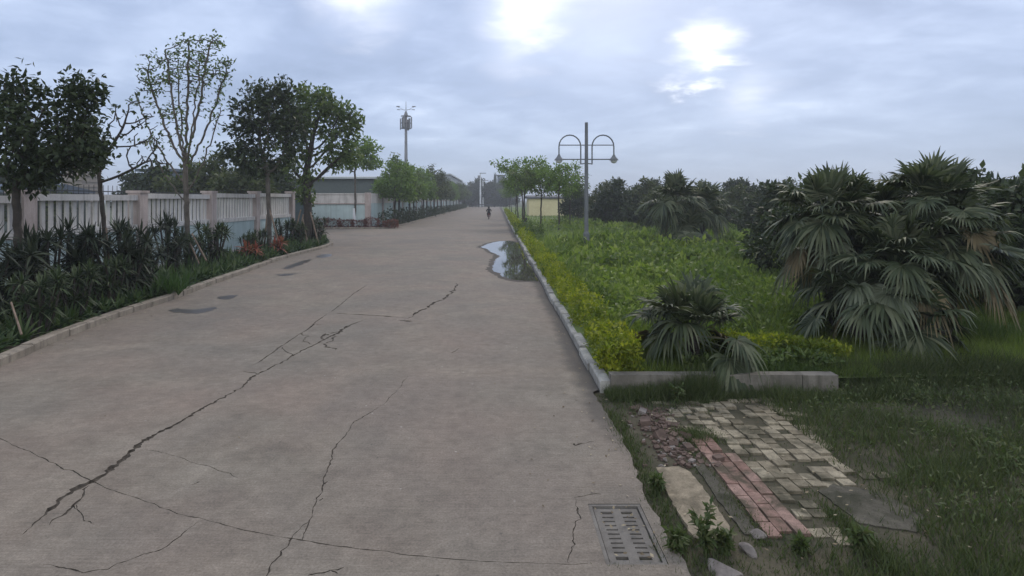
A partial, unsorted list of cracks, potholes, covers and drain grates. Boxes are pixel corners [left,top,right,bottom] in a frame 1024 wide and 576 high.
drain grate [588,504,669,565]
crack [0,284,597,576]
